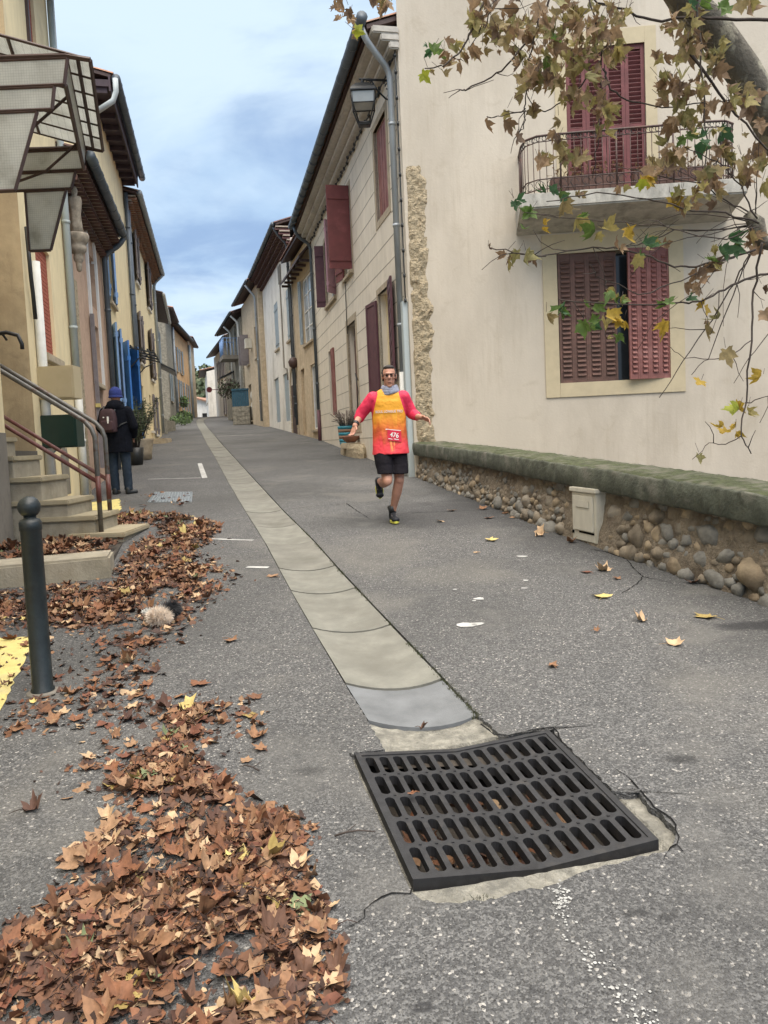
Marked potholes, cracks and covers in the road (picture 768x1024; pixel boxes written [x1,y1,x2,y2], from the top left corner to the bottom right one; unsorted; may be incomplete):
drain grate [355,730,659,891]
crack [594,549,670,593]
crack [338,888,412,933]
crack [615,768,683,857]
